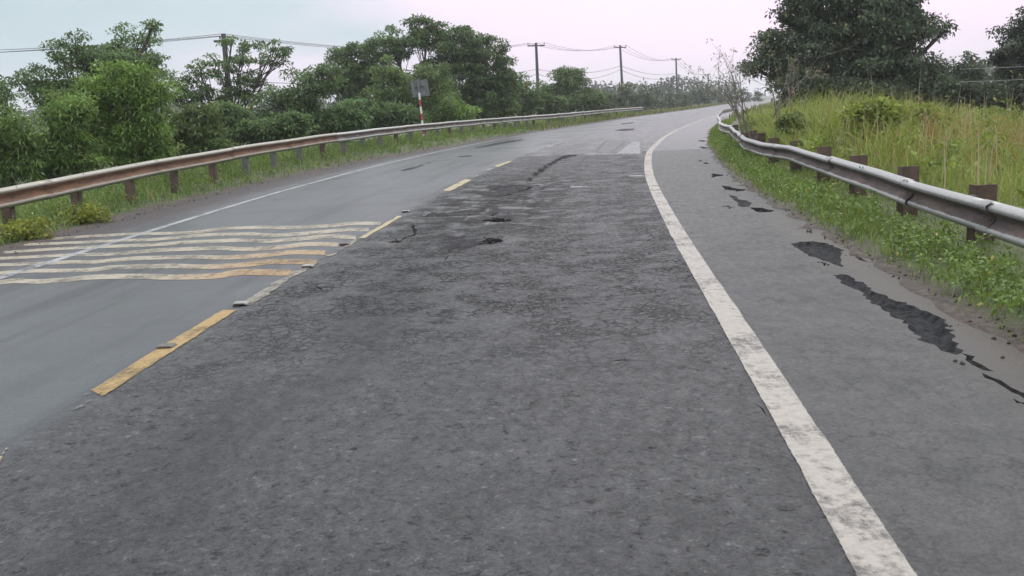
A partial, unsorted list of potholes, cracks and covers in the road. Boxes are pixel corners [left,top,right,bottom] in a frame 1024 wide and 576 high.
pothole [791,241,845,267]
pothole [833,274,964,355]
crack [401,214,430,259]
pothole [729,195,752,207]
